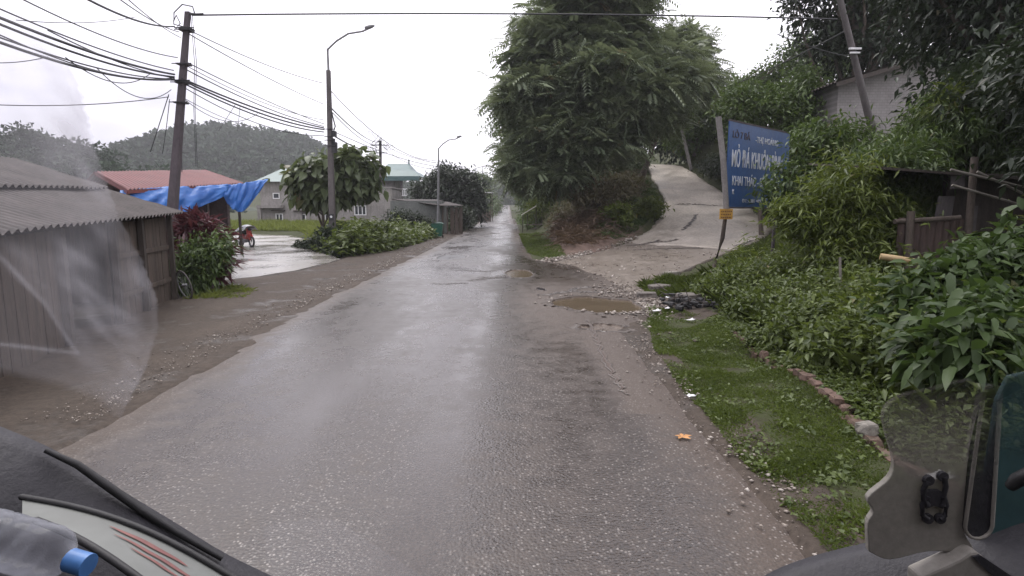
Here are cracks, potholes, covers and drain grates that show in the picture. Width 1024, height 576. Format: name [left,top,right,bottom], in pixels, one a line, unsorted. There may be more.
pothole [540,294,645,315]
pothole [502,269,537,279]
crack [626,214,703,250]
pothole [570,322,638,333]
